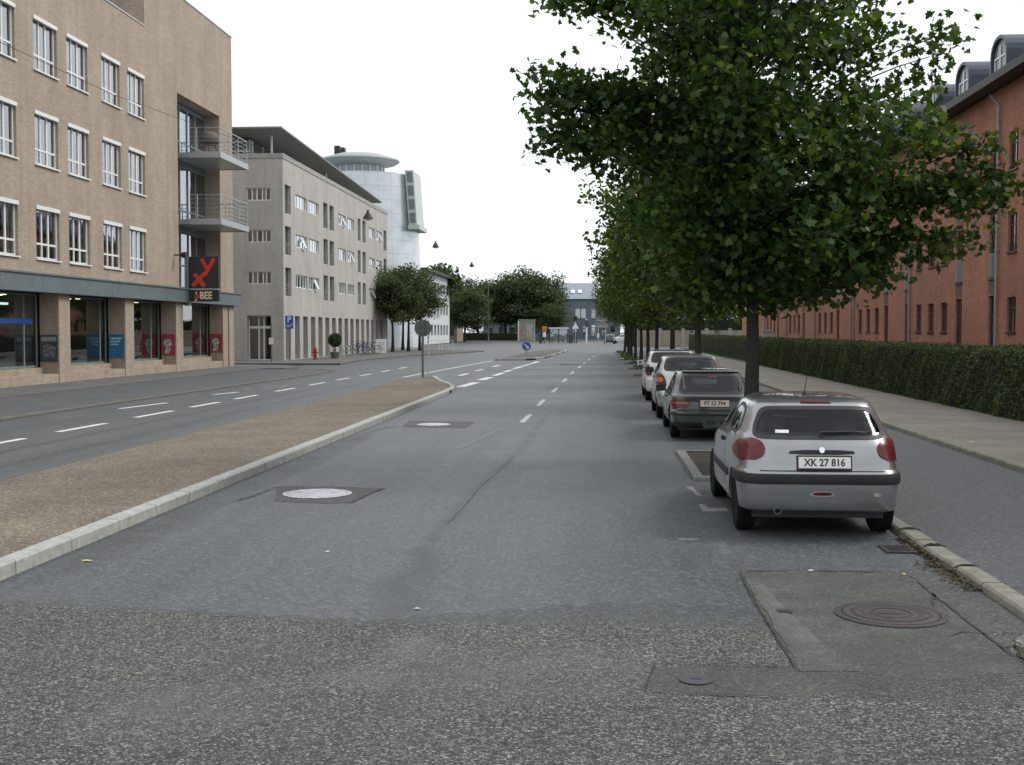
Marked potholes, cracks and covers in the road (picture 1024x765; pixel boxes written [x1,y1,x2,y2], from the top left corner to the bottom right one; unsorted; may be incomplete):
drain grate [878,544,918,553]
manhole cover [283,489,352,499]
manhole cover [834,601,949,628]
utility cover [679,674,713,685]
